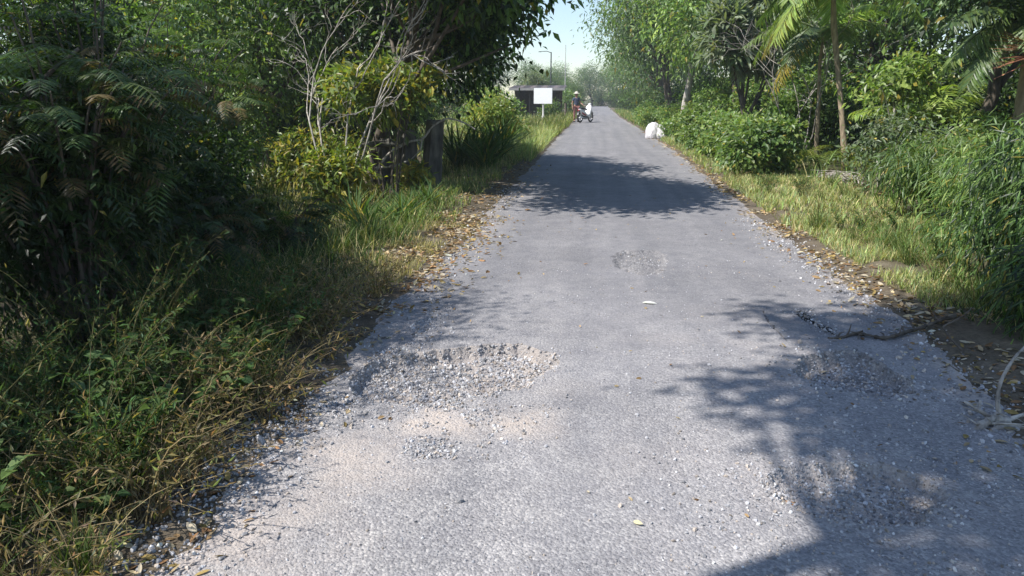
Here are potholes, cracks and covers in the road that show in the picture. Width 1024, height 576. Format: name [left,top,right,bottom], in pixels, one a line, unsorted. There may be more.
crack [761,309,837,344]
pothole [611,249,669,276]
pothole [349,343,560,404]
pothole [793,350,918,397]
pothole [757,460,950,527]
